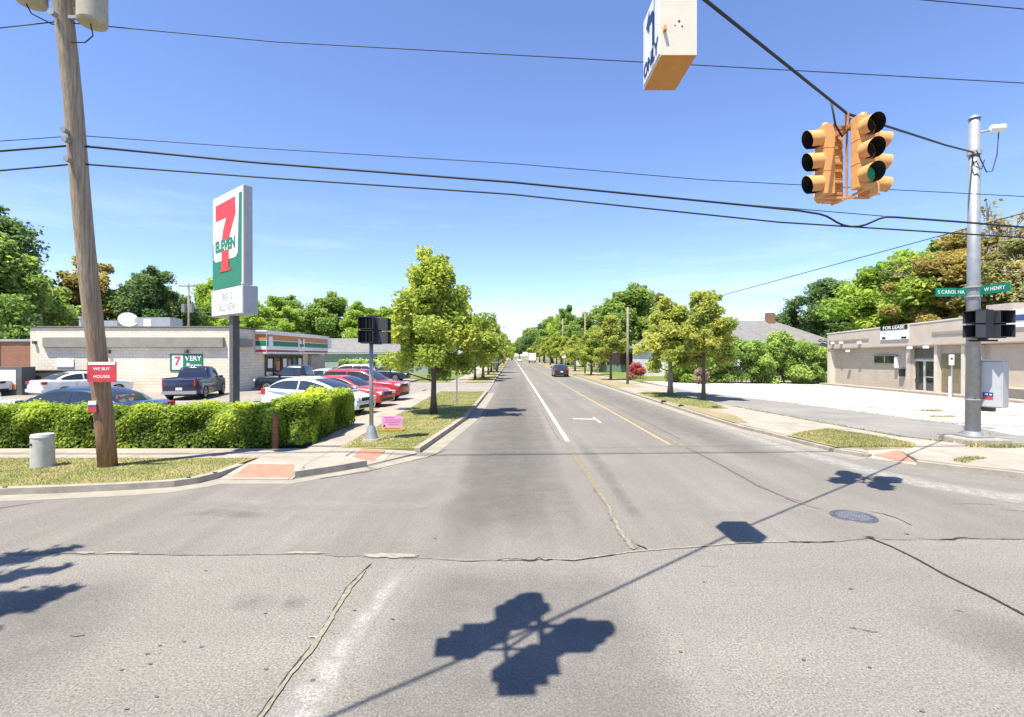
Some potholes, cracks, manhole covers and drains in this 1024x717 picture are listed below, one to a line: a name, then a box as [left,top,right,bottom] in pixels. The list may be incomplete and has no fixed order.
manhole cover [829,510,879,523]
crack [622,410,816,508]
crack [498,488,771,561]
crack [872,511,1024,540]
crack [2,552,481,717]
